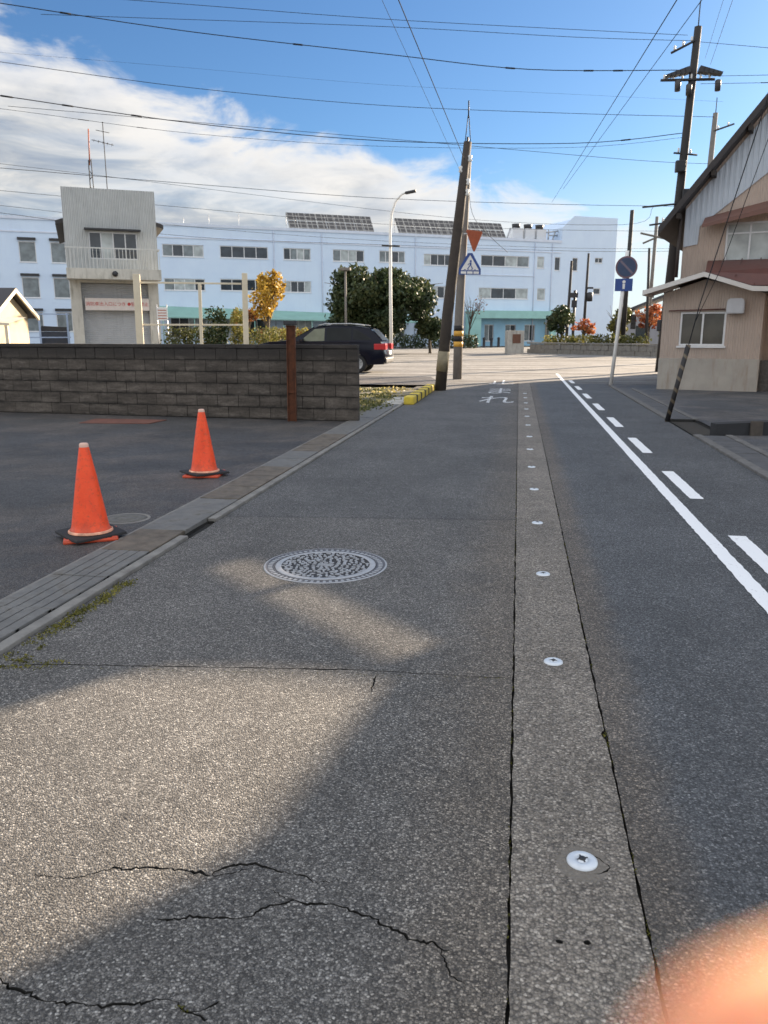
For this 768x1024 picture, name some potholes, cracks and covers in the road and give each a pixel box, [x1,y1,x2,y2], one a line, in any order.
manhole cover [264,548,387,584]
manhole cover [107,513,151,524]
crack [0,862,466,1021]
